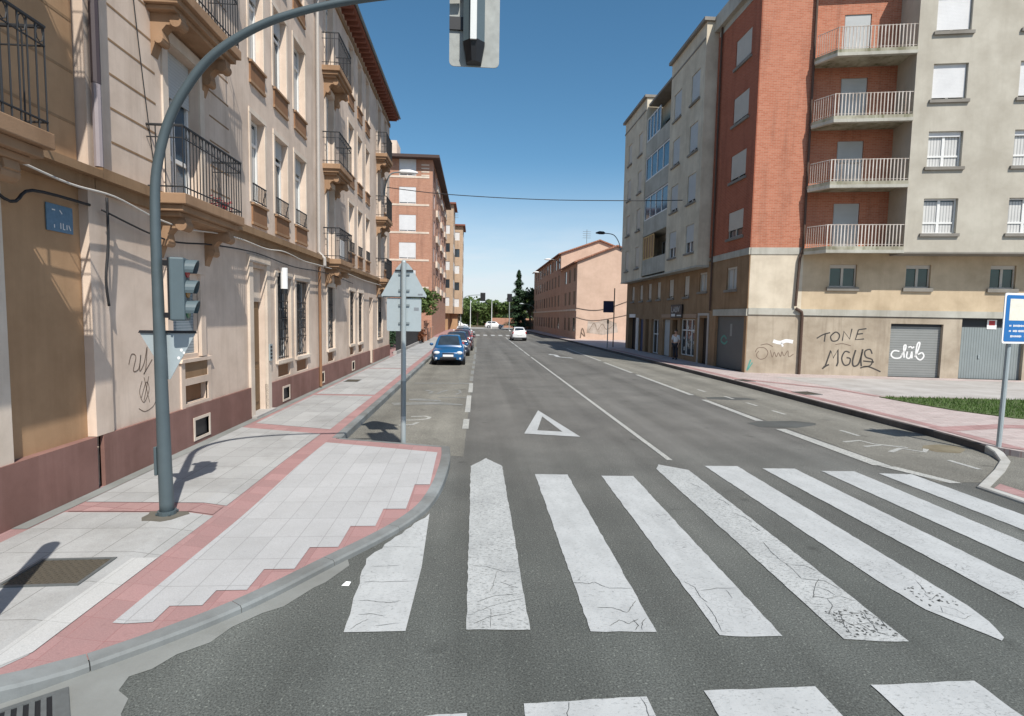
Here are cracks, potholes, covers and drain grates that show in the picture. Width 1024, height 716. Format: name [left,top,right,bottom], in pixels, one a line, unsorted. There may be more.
crack [905,586,971,619]
crack [693,484,888,634]
crack [474,566,523,627]
crack [574,582,645,630]
crack [355,546,400,626]
